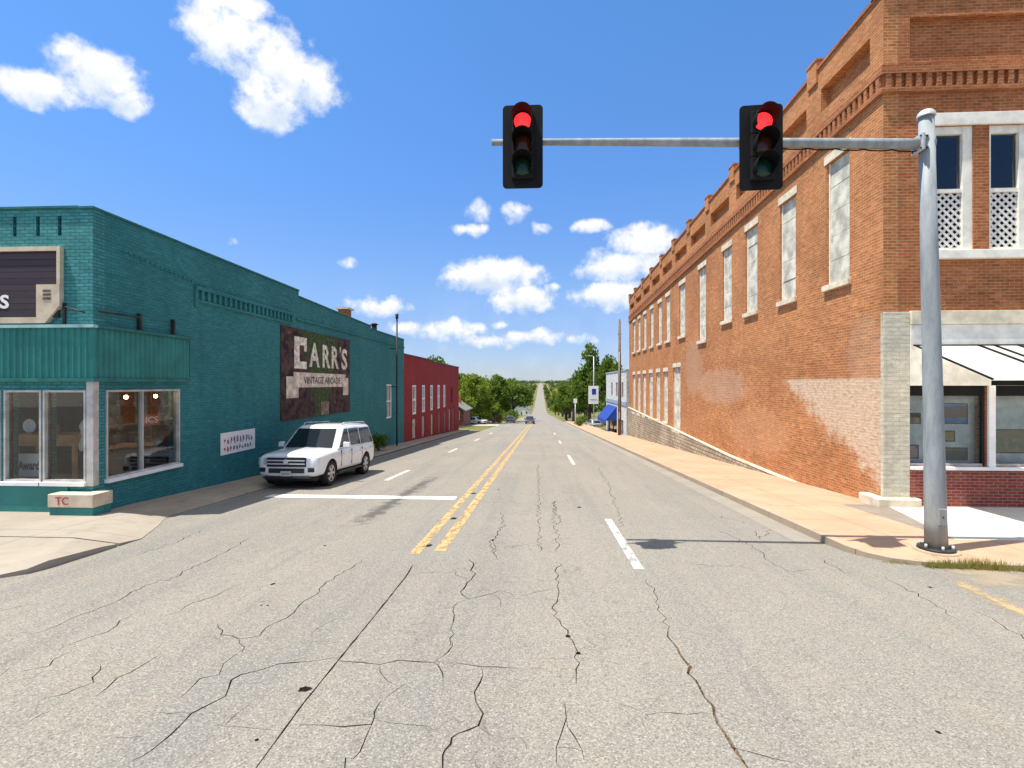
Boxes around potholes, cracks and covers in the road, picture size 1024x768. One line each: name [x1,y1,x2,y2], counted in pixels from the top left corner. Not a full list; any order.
crack [30,656,157,721]
crack [115,501,580,768]
crack [0,541,243,676]
crack [702,515,790,572]
crack [619,581,799,768]
